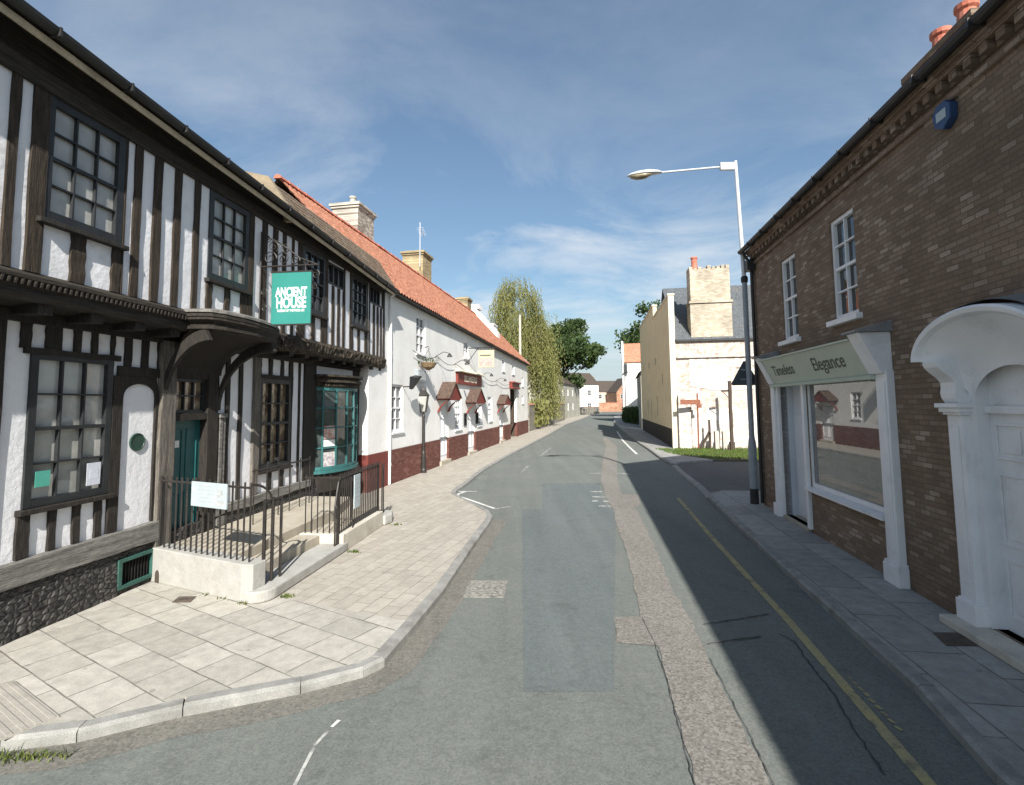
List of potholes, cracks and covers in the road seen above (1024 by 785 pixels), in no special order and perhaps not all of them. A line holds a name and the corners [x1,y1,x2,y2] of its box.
crack [779,633,886,775]
manhole cover [933,632,979,646]
